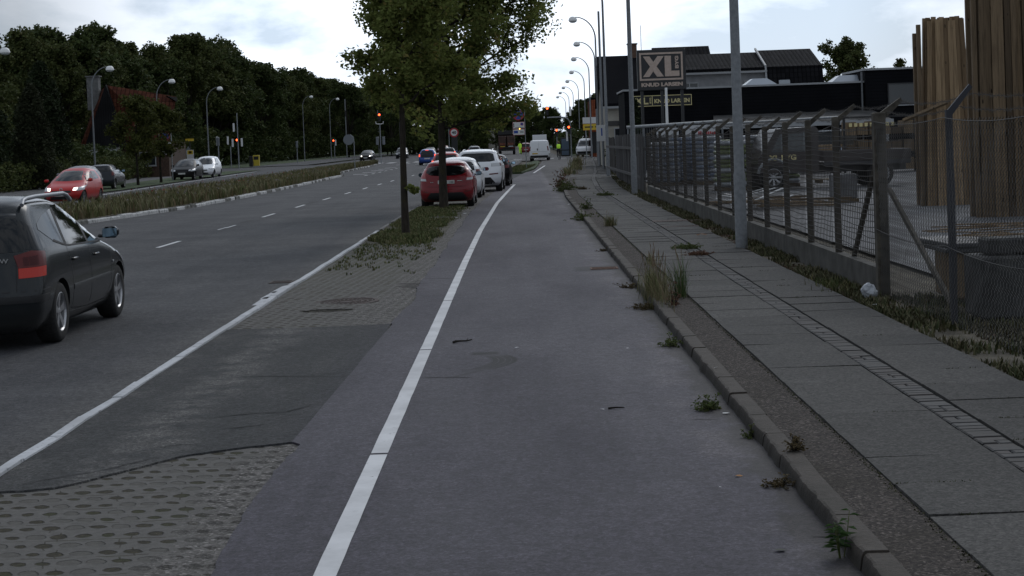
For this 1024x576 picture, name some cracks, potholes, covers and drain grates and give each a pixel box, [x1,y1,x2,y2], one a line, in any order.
manhole cover [315,297,379,305]
crack [208,405,309,428]
